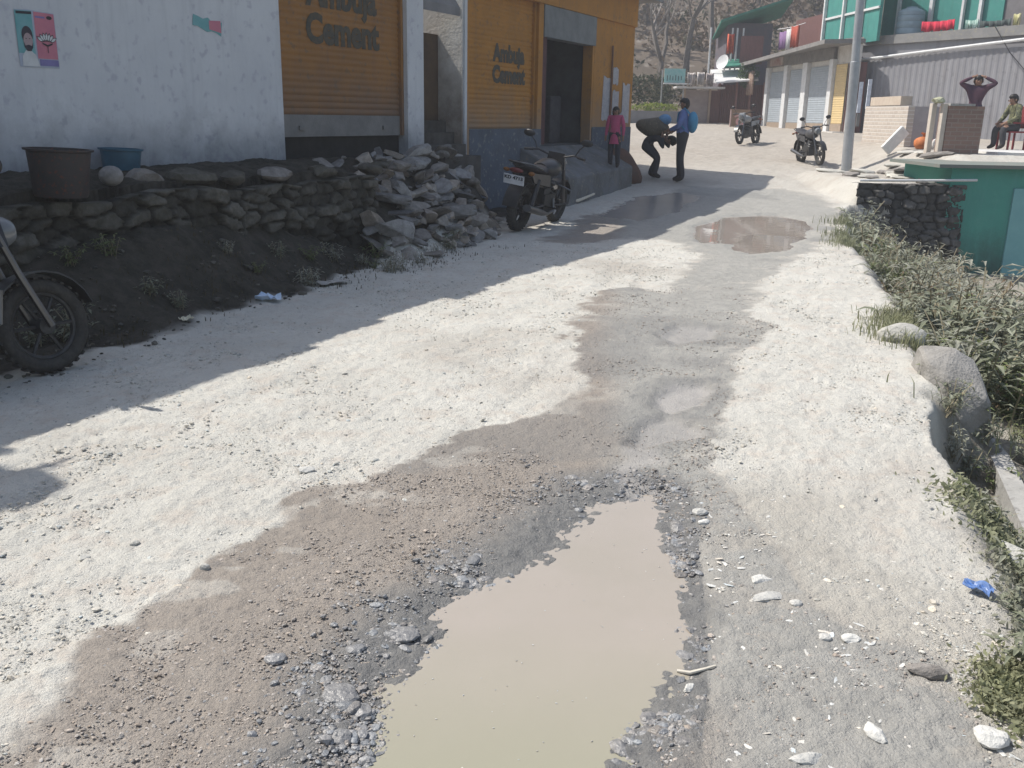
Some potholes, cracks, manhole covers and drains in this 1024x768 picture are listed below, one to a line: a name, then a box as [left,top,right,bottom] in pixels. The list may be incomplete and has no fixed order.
pothole [682,213,830,256]
pothole [346,491,714,768]
pothole [593,188,707,222]
